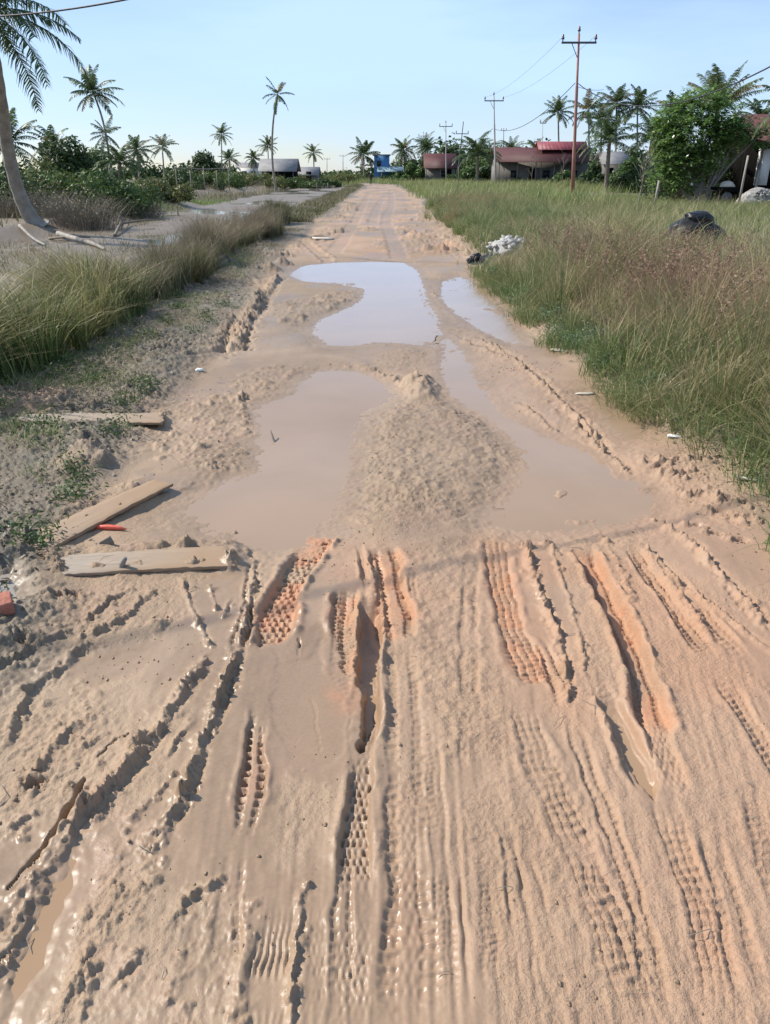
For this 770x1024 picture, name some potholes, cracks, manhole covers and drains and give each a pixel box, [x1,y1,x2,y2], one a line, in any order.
pothole [436,275,528,346]
pothole [284,260,462,351]
pothole [431,336,669,541]
pothole [170,368,403,561]
